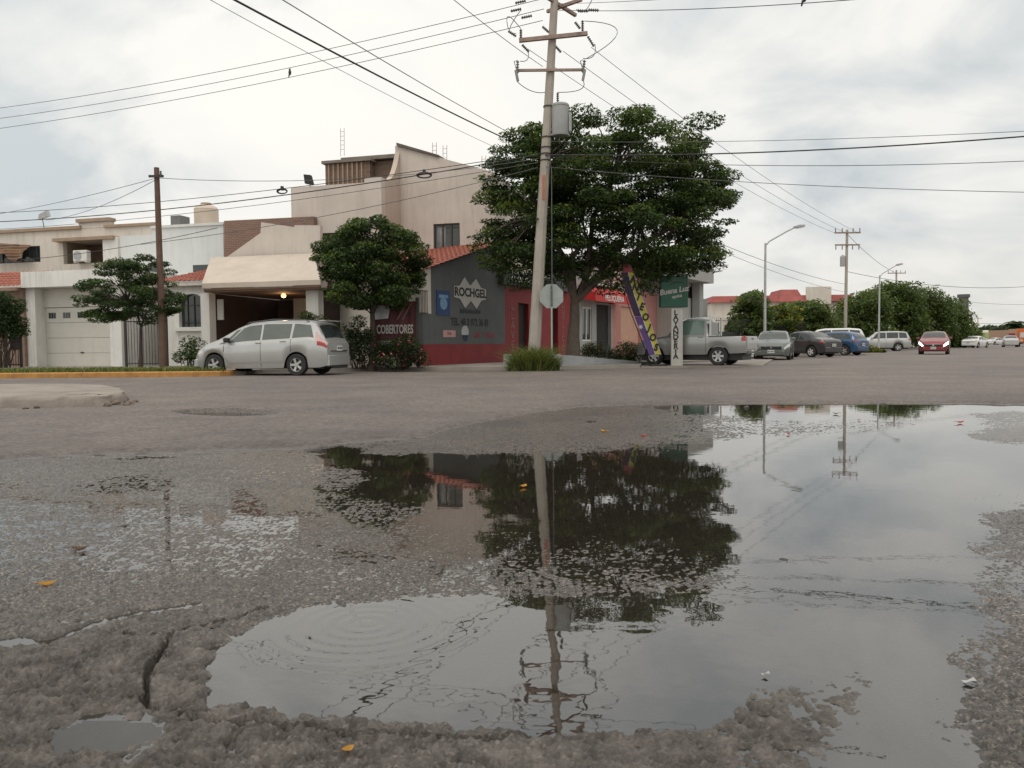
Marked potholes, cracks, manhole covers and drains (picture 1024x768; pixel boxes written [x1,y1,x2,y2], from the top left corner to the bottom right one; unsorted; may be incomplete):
crack [0,597,511,743]
pothole [168,408,281,416]
pothole [197,582,844,740]
pothole [29,720,162,756]
